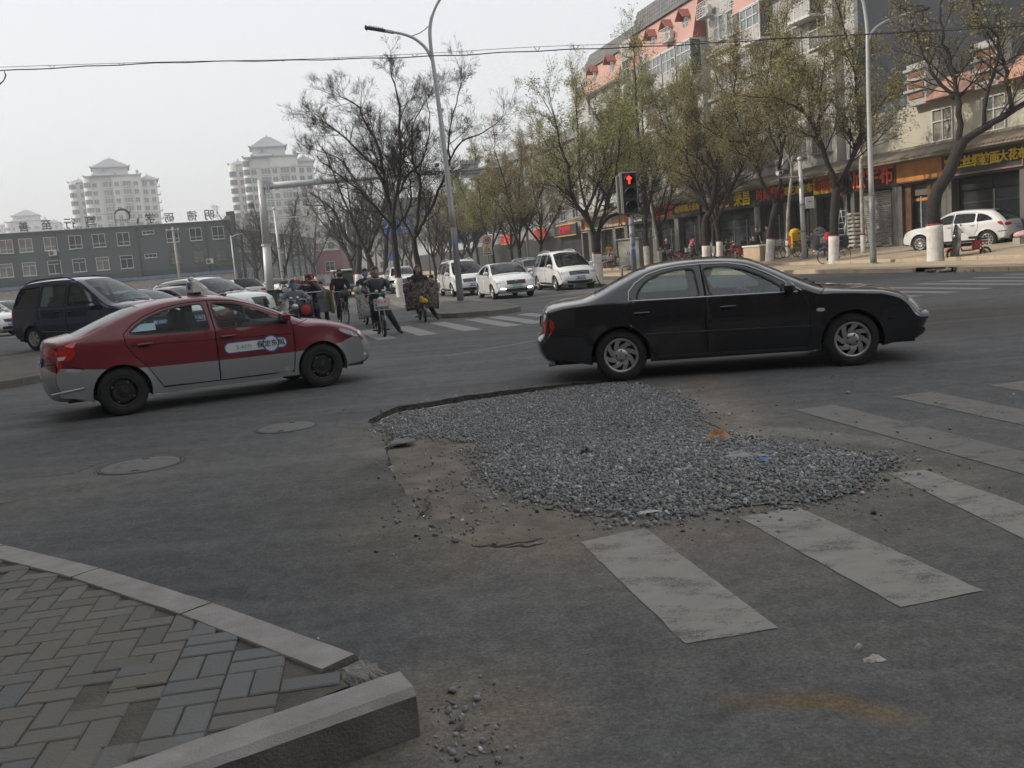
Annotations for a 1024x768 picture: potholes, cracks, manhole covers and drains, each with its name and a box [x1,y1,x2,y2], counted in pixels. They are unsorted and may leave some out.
manhole cover [255,421,318,434]
pothole [368,381,741,547]
manhole cover [97,456,183,475]
